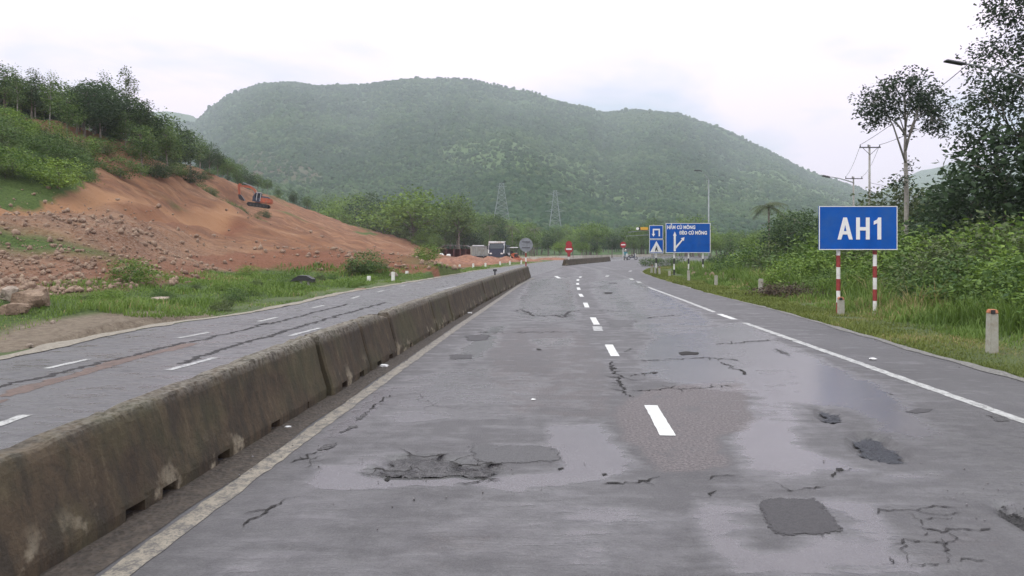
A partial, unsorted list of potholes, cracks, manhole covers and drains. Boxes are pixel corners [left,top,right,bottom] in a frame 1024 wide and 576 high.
crack [486,309,586,334]
crack [877,505,991,567]
pothole [853,435,908,464]
pothole [819,412,842,423]
pothole [379,459,498,478]
crack [602,476,659,485]
crack [609,340,792,397]
crack [243,498,286,526]
